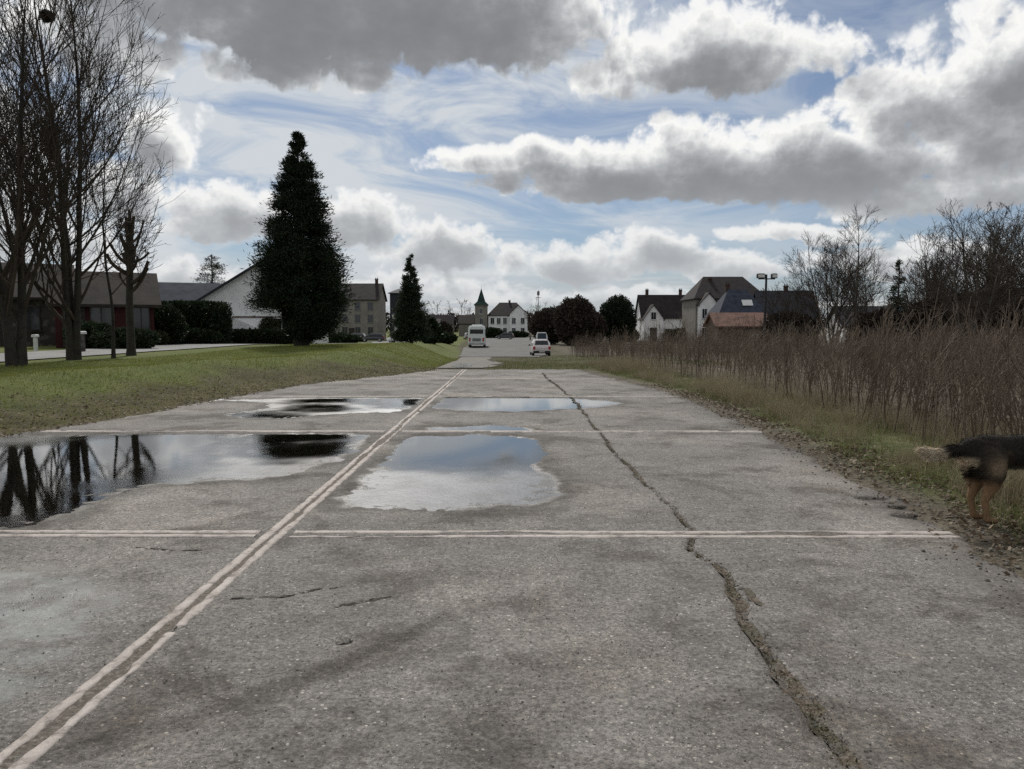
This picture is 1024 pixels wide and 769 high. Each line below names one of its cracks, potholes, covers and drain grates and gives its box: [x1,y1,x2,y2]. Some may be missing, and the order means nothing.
crack [543,374,871,769]
crack [231,586,392,607]
